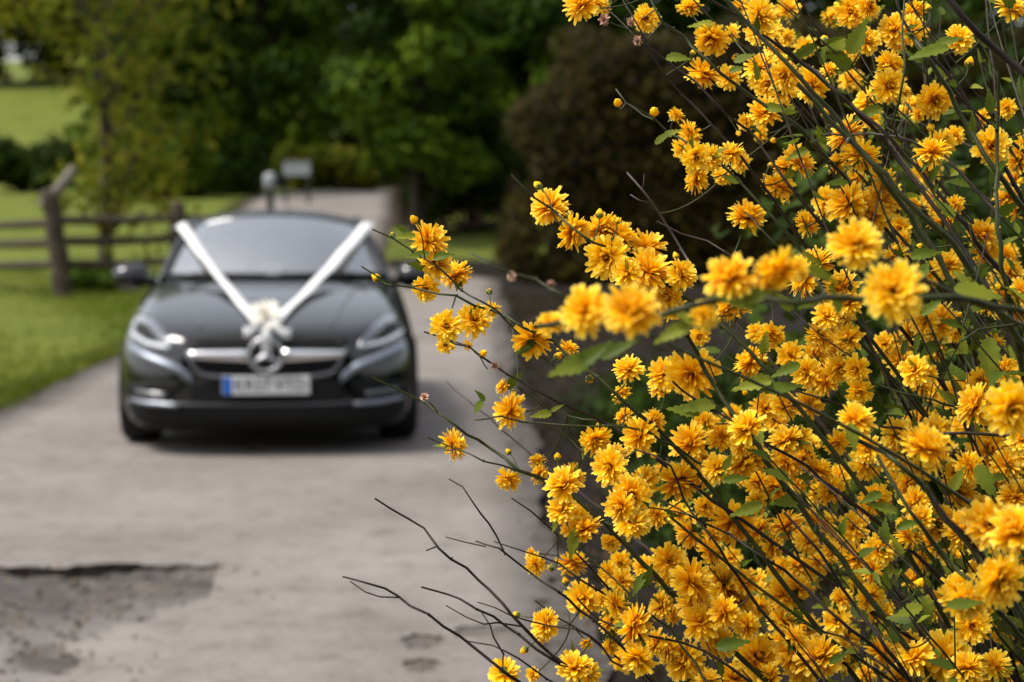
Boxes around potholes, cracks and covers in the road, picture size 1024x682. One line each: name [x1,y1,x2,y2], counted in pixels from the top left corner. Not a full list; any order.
pothole [0,563,279,682]
pothole [391,658,454,673]
pothole [398,633,446,650]
